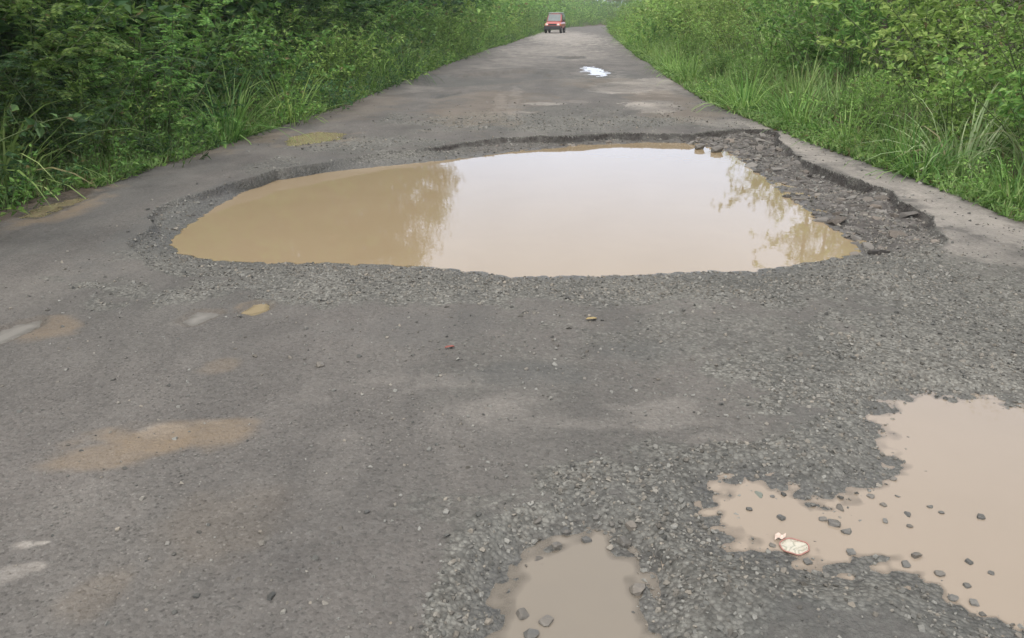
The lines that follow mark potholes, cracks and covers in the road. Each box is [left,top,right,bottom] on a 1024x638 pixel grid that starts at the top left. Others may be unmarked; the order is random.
pothole [649,370,1024,638]
pothole [570,64,616,78]
